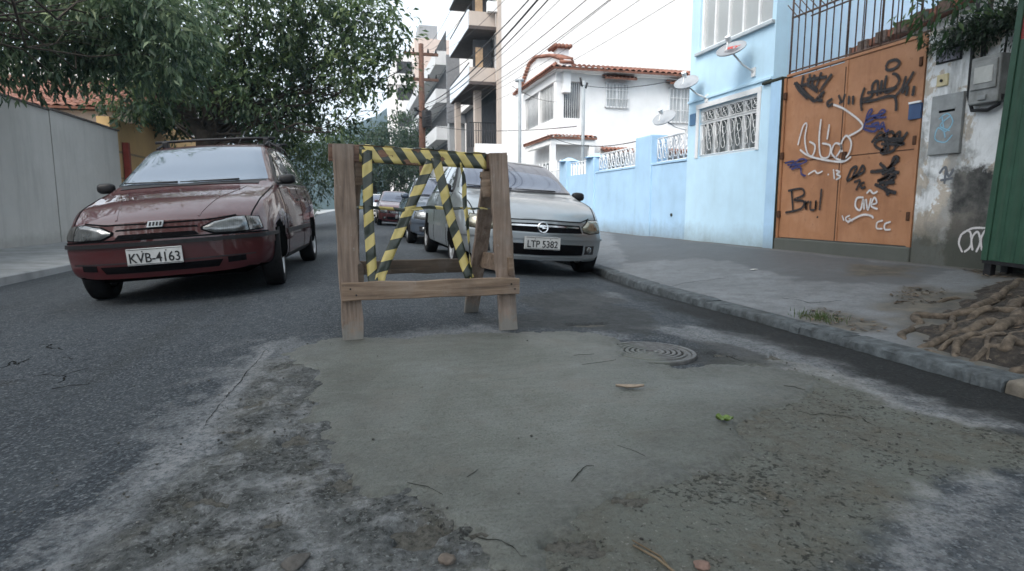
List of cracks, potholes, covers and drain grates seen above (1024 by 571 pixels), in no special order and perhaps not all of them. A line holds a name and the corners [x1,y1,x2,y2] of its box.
manhole cover [619,341,697,366]
crack [2,344,89,389]
